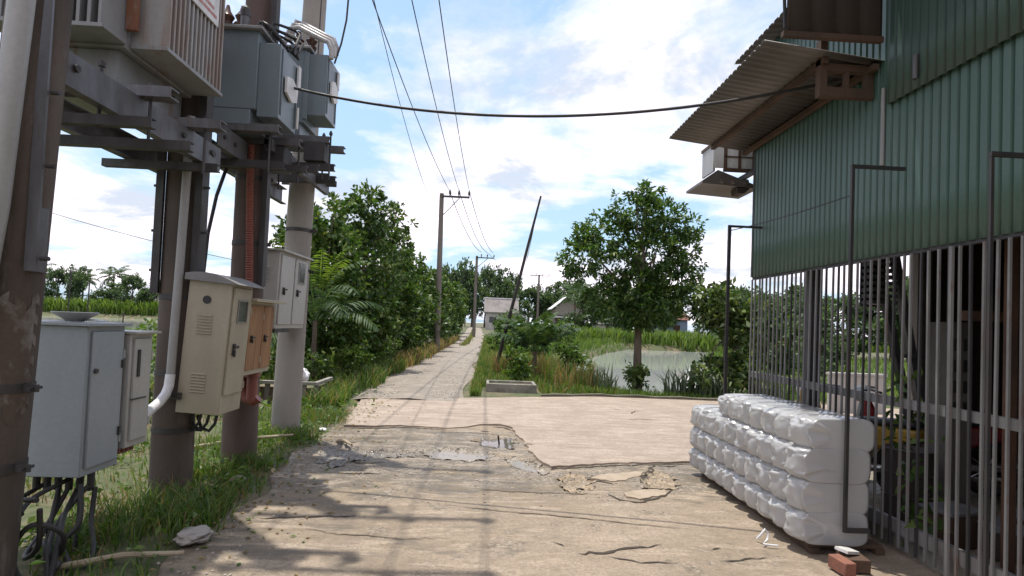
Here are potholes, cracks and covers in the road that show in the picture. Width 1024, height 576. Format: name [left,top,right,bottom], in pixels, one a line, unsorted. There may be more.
pothole [313,442,417,468]
pothole [502,456,550,475]
pothole [638,470,682,490]
crack [448,504,688,563]
pothole [556,471,596,493]
pothole [420,446,496,462]
pothole [471,438,519,450]
